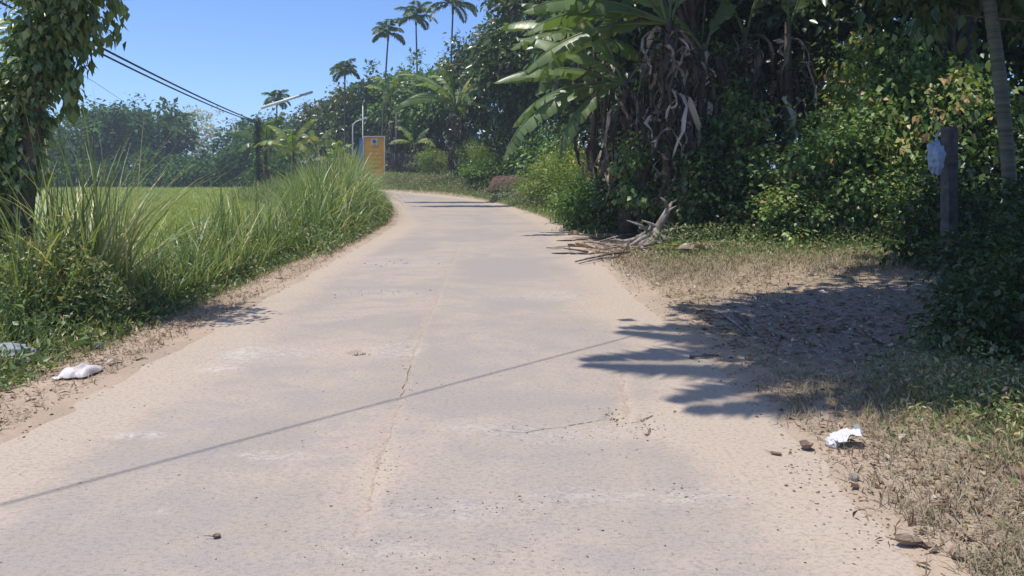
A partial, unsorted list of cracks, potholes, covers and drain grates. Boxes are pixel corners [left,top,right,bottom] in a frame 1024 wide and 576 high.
crack [495,371,677,436]
